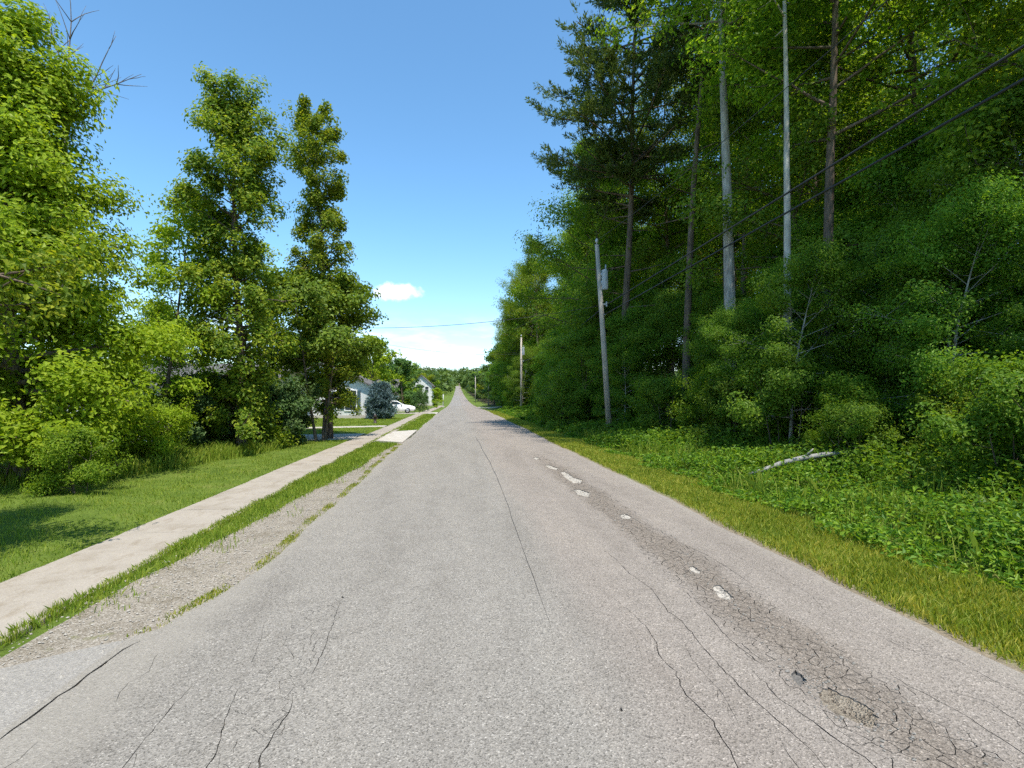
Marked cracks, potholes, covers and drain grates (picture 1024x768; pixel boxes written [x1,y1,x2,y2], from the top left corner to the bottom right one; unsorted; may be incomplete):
pothole [791,670,807,687]
crack [122,689,189,768]
crack [540,456,1024,768]
crack [206,604,344,768]
pothole [818,687,879,729]
